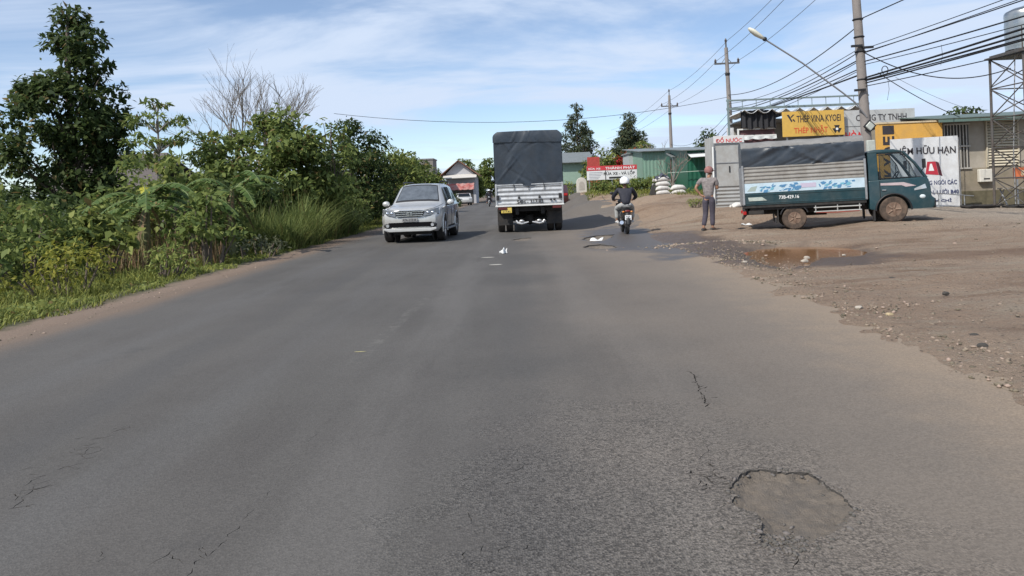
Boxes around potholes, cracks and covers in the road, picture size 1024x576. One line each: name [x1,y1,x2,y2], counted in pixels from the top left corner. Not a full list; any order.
crack [99,464,297,576]
crack [688,371,717,409]
crack [11,426,131,509]
pothole [729,469,853,553]
